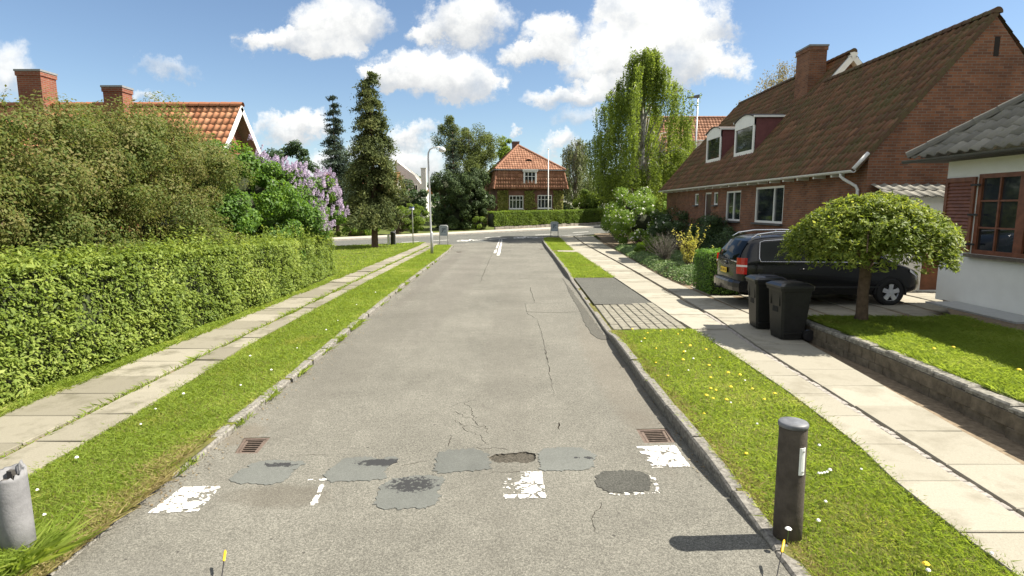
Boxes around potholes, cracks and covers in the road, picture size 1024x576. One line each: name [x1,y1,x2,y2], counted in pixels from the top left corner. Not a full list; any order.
drain grate [637,429,675,443]
pothole [489,451,536,463]
drain grate [236,438,269,453]
crack [448,401,507,450]
